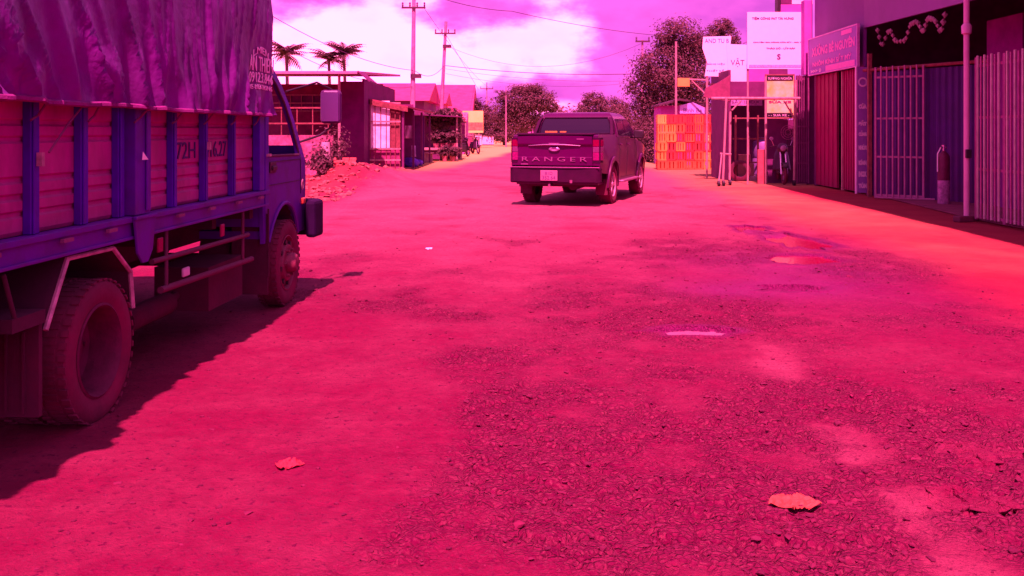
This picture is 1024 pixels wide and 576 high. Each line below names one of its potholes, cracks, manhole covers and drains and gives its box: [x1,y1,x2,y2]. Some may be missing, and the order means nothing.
pothole [627,324,756,340]
pothole [723,224,787,238]
pothole [748,252,869,268]
pothole [743,230,855,254]
pothole [744,283,836,294]
